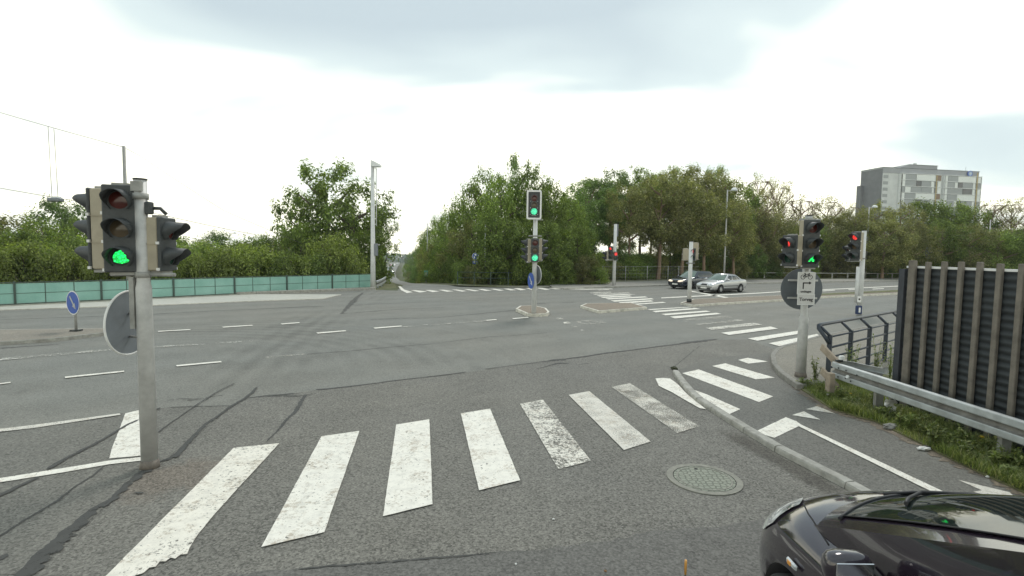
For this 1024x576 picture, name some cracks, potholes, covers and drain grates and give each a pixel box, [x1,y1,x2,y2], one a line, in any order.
manhole cover [667,463,743,496]
